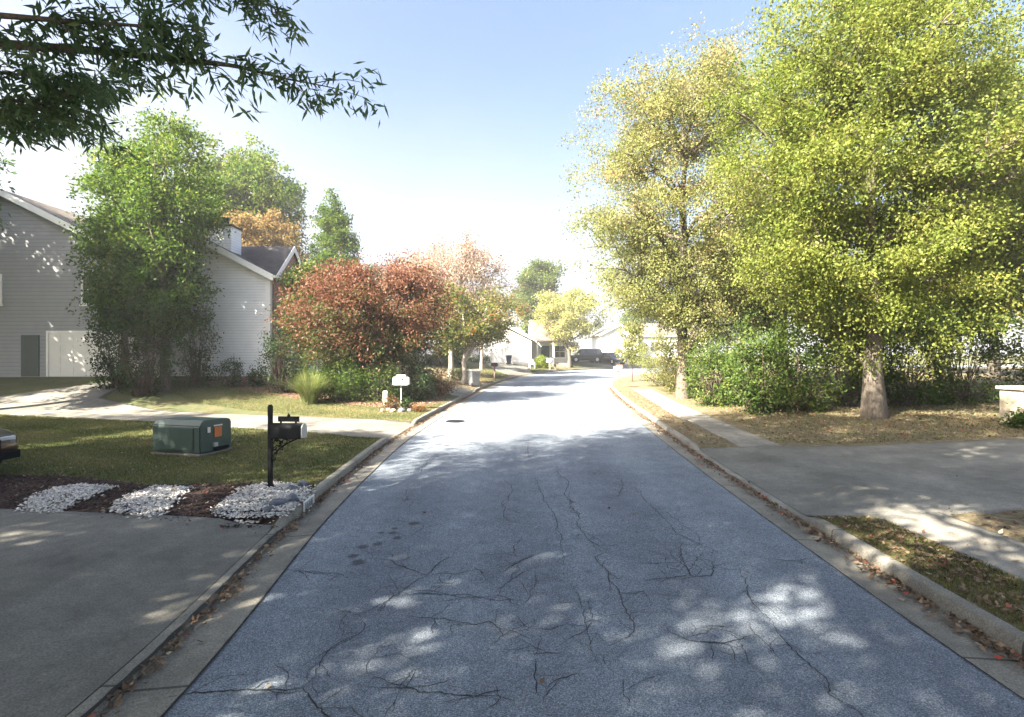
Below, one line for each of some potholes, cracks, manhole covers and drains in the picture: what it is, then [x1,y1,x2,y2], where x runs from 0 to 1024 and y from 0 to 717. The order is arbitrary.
crack [169,464,863,717]
